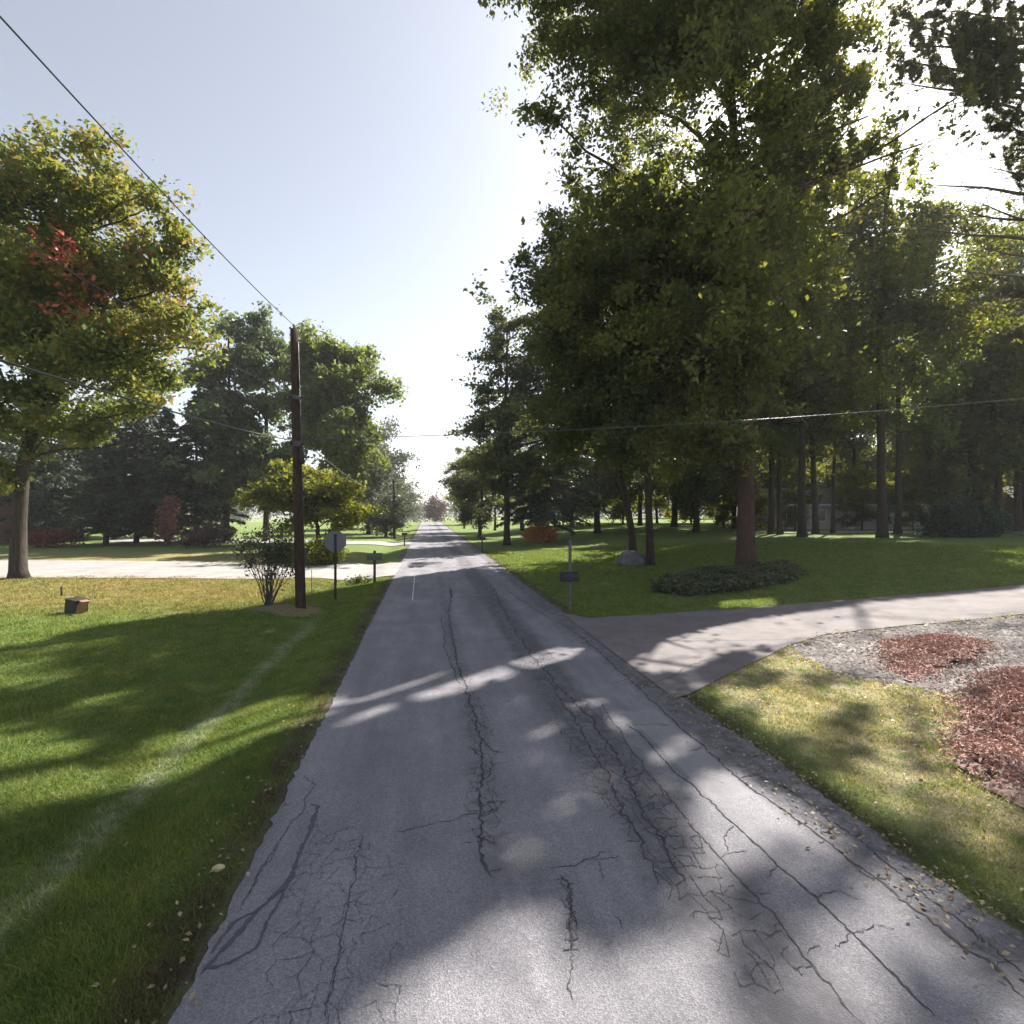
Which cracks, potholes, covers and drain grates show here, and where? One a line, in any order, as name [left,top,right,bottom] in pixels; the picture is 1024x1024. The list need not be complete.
crack [248,819,405,1024]
crack [400,590,503,877]
crack [475,574,860,1021]
